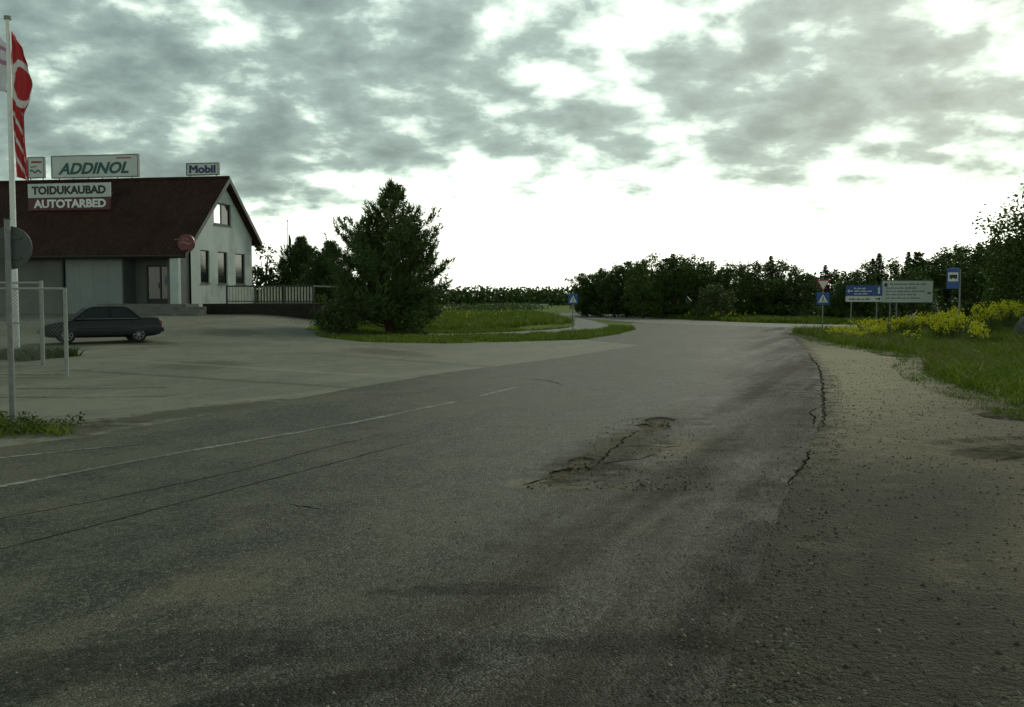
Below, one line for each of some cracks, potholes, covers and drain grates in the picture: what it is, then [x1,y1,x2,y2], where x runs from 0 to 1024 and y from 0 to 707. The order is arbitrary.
crack [787,354,827,486]
pothole [634,417,676,430]
pothole [549,457,596,480]
